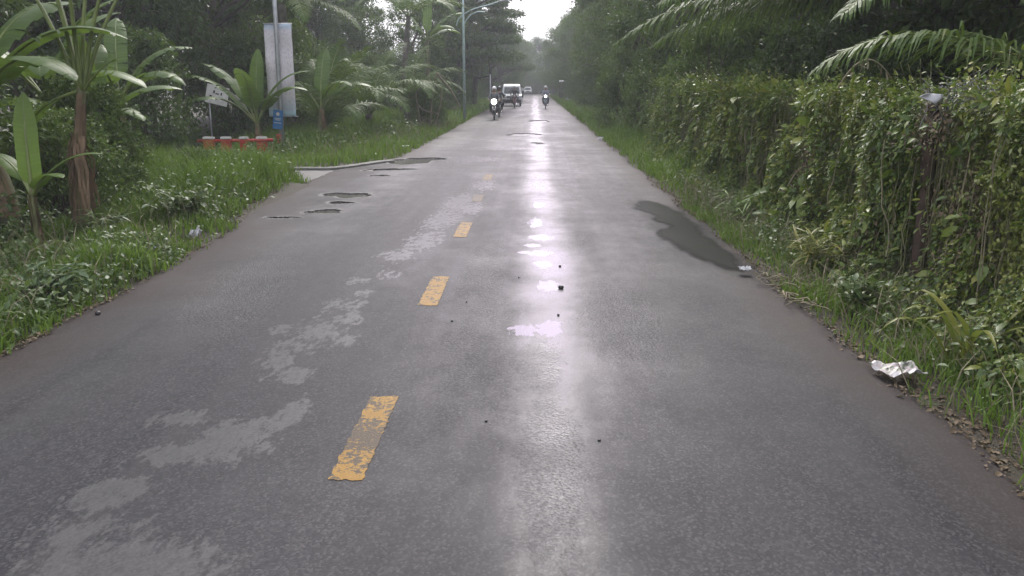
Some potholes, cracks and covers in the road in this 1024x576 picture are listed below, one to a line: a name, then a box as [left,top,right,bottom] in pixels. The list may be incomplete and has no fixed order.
pothole [386,157,451,165]
